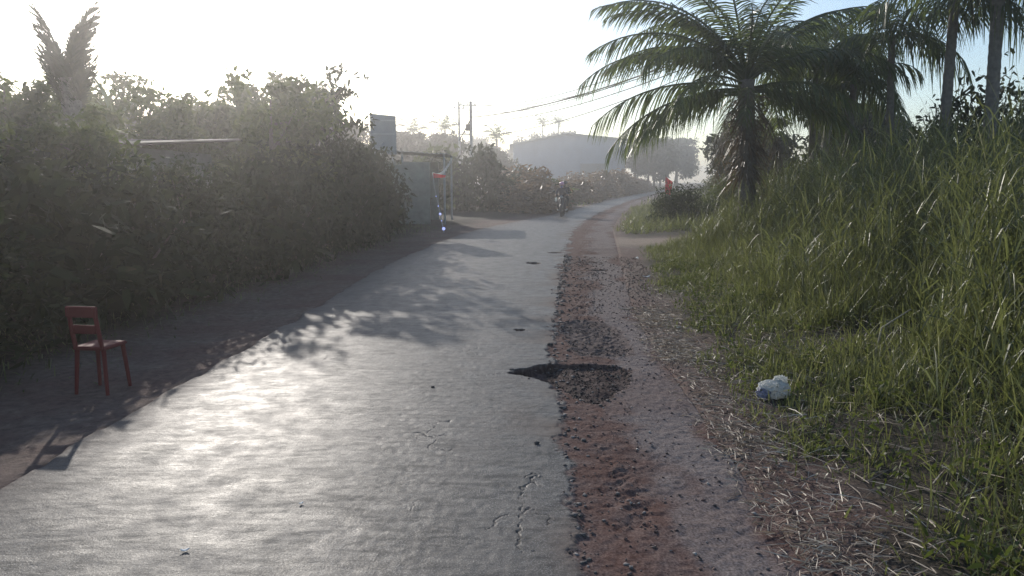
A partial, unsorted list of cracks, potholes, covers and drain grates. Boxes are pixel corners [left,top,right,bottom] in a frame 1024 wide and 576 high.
crack [483,473,554,554]
pothole [506,362,635,405]
crack [407,420,454,451]
